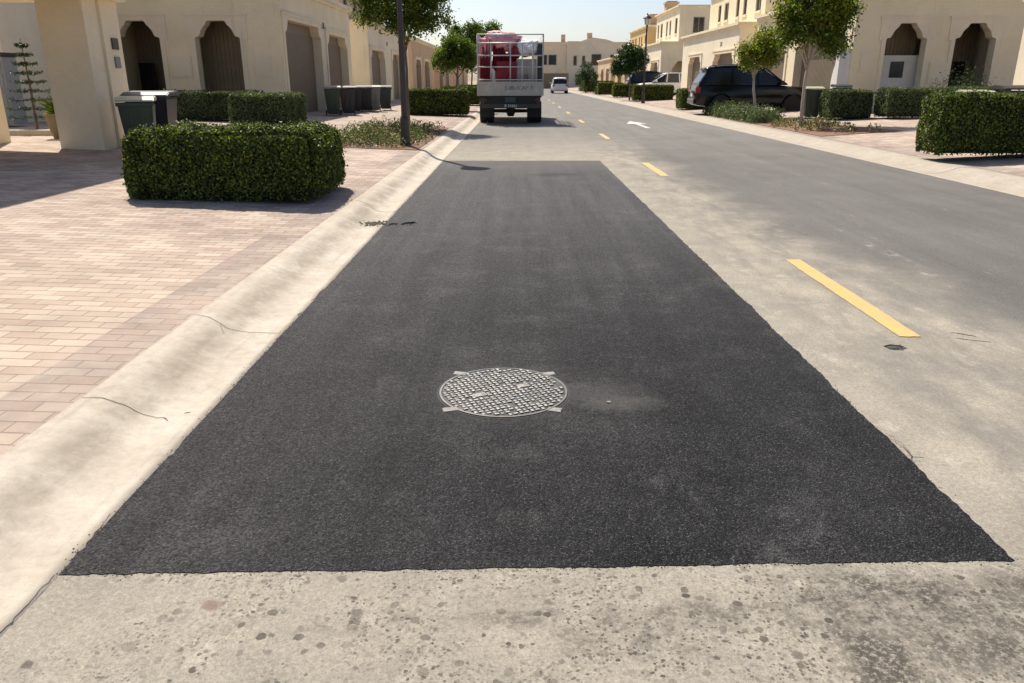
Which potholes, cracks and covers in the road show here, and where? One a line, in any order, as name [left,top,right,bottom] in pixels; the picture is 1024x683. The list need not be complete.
manhole cover [437,368,570,419]
crack [82,397,190,421]
